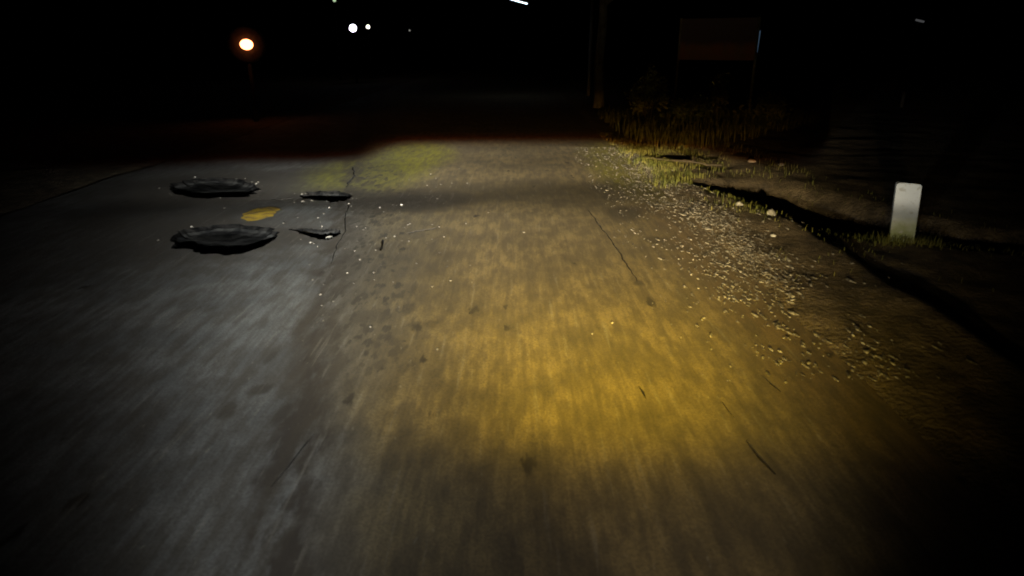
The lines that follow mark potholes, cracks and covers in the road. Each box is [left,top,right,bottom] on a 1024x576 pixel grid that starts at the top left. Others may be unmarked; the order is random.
pothole [170,224,280,256]
crack [588,210,637,281]
crack [331,205,350,263]
pothole [169,178,261,199]
pothole [288,228,341,240]
pothole [299,191,352,203]
crack [747,441,776,475]
